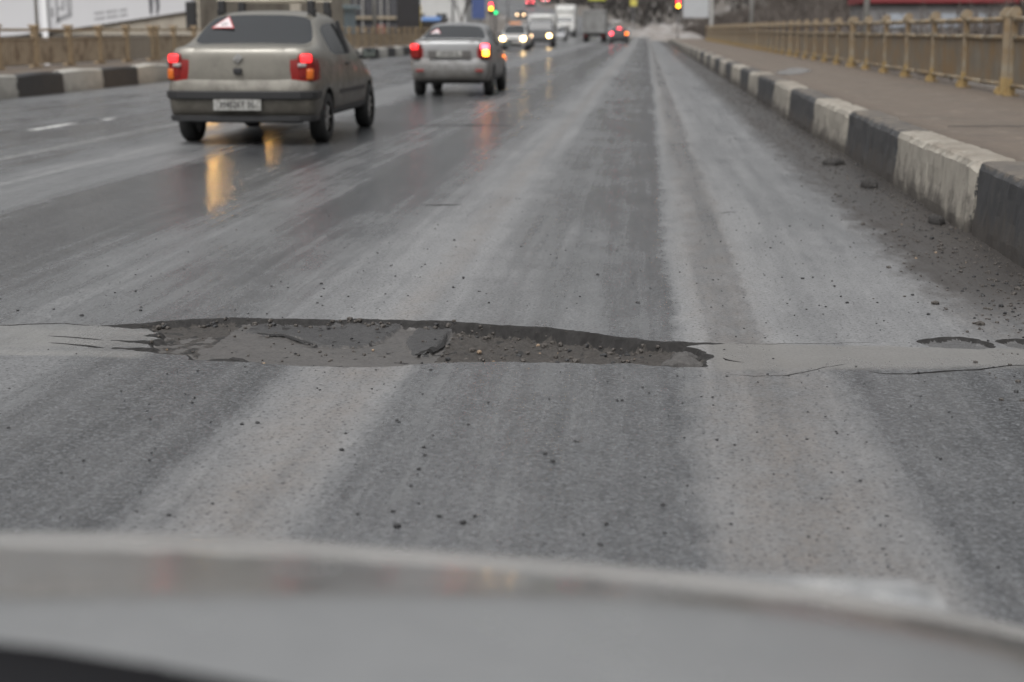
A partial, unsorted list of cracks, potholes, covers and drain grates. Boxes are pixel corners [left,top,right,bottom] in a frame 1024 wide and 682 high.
crack [723,342,866,377]
crack [868,365,1024,375]
pothole [916,337,996,349]
pothole [101,317,725,367]
pothole [995,338,1024,349]
